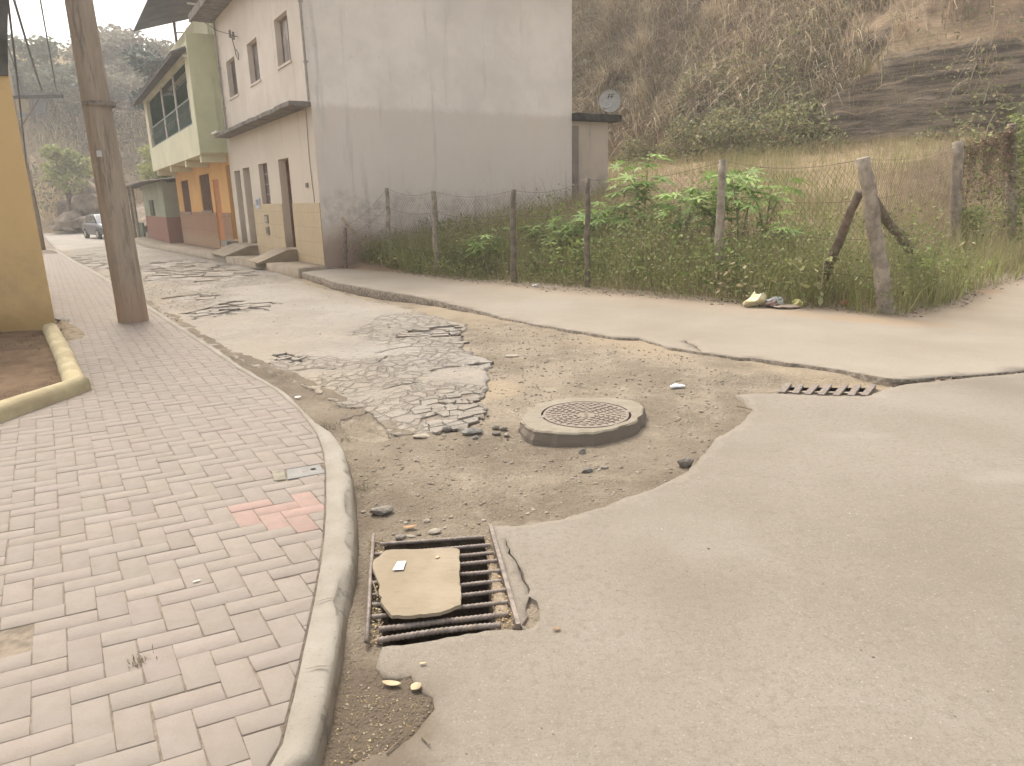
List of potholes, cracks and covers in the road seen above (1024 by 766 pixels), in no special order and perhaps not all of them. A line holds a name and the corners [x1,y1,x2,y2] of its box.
crack [140,259,279,320]
crack [388,383,487,431]
crack [272,352,337,371]
manhole cover [518,397,647,447]
pothole [339,412,391,443]
utility cover [286,464,324,480]
crack [379,324,470,362]
drain grate [364,524,521,647]
drain grate [778,383,876,396]
